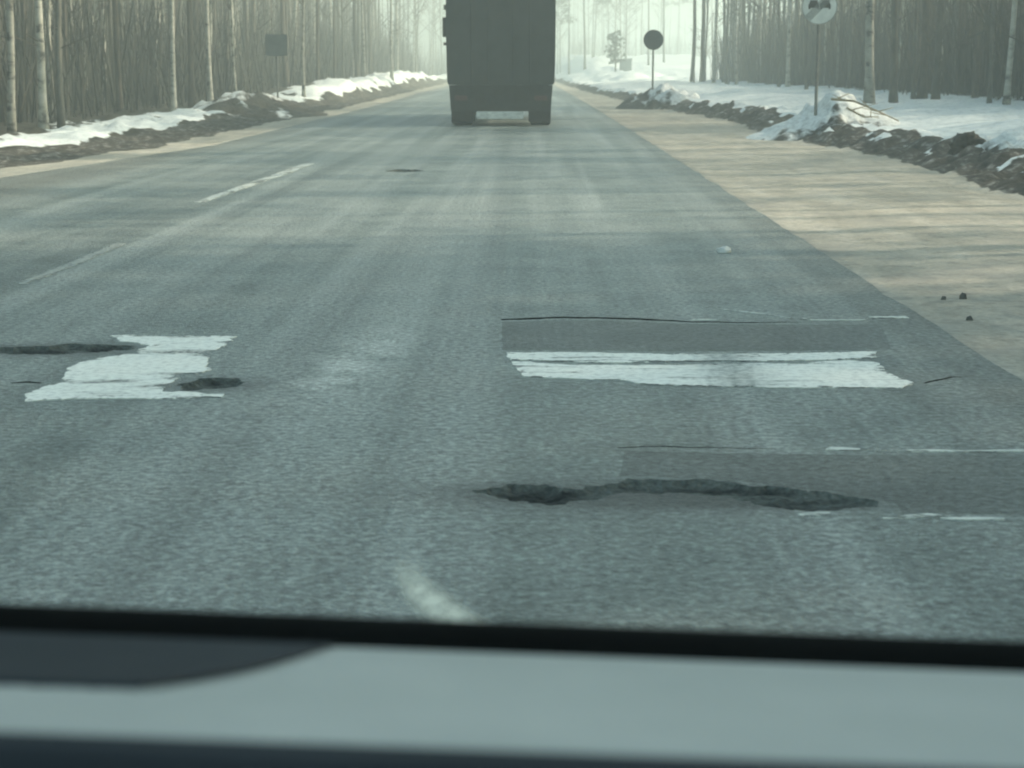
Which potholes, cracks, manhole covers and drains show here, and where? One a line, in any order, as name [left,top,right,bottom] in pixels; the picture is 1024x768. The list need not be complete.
pothole [471,478,879,512]
pothole [177,378,246,391]
pothole [0,343,134,355]
